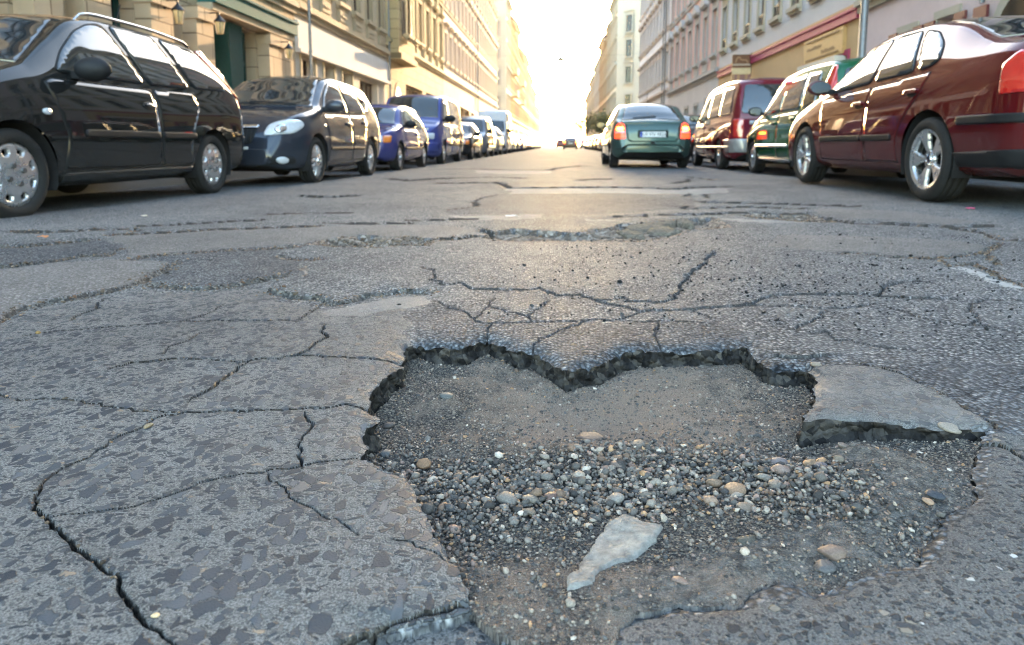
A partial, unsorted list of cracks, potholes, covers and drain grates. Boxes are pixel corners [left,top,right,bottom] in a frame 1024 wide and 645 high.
crack [0,165,1024,645]
pothole [484,217,731,242]
pothole [361,342,986,645]
